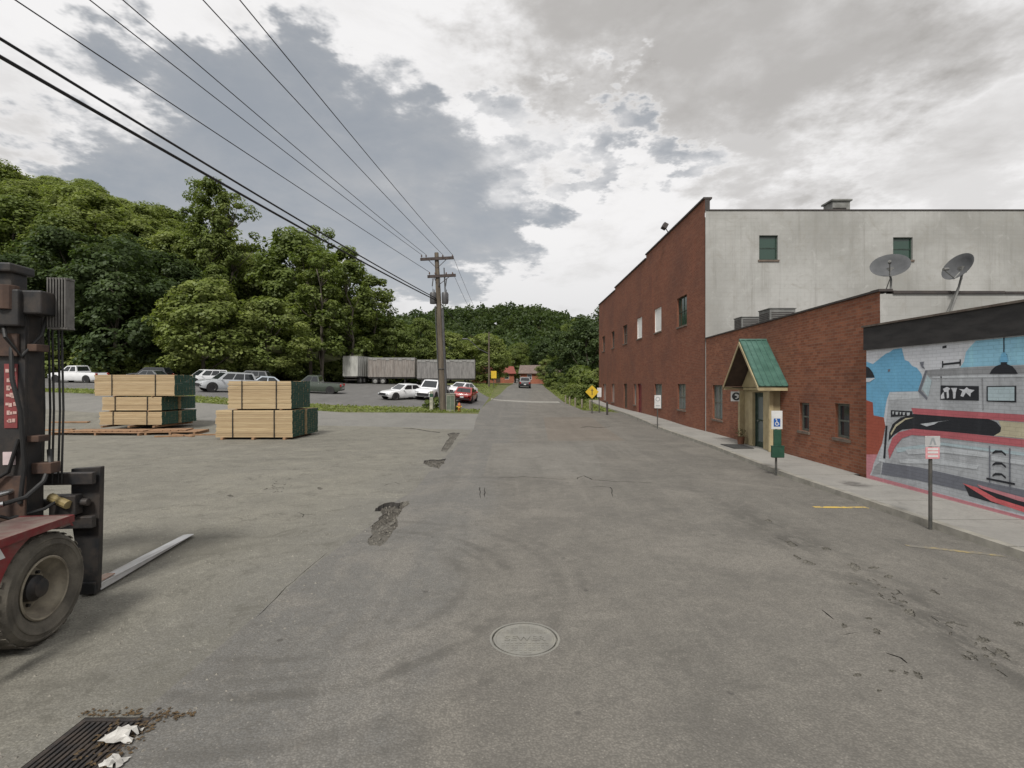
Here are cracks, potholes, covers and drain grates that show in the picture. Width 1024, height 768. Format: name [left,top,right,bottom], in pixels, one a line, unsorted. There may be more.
drain grate [21,717,152,768]
pothole [367,501,410,546]
crack [931,616,1009,677]
pothole [441,433,460,452]
pothole [424,459,446,469]
manhole cover [490,622,560,657]
